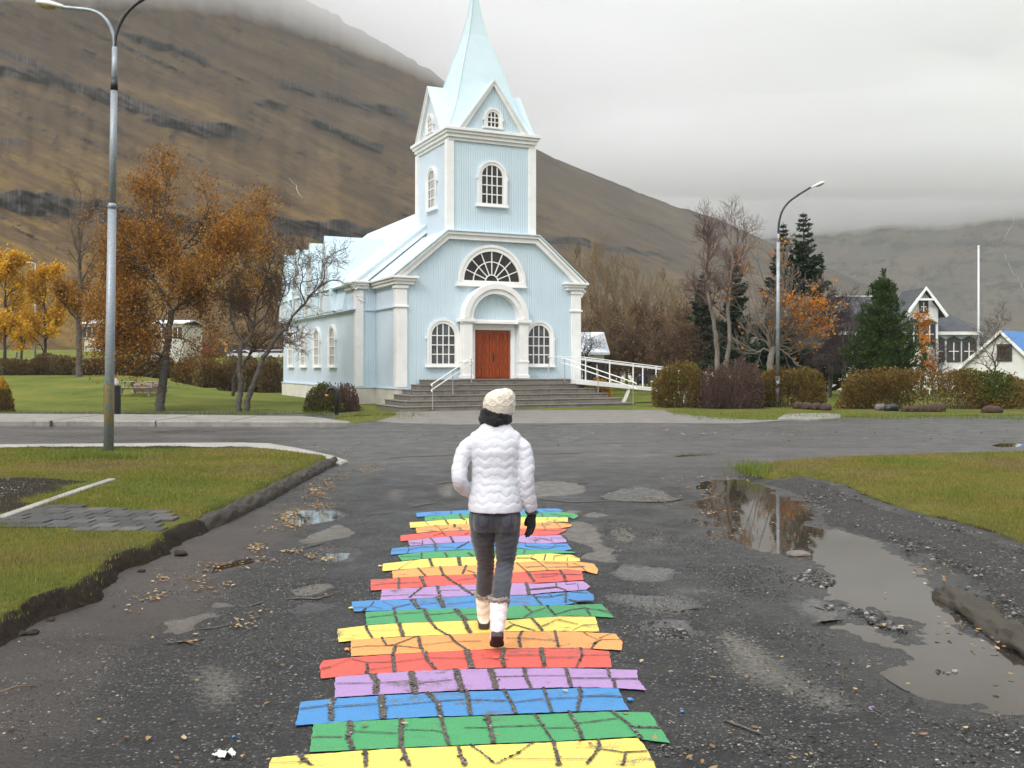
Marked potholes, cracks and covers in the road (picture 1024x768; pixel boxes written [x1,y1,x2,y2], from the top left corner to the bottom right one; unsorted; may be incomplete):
pothole [309,547,363,563]
pothole [277,508,346,525]
